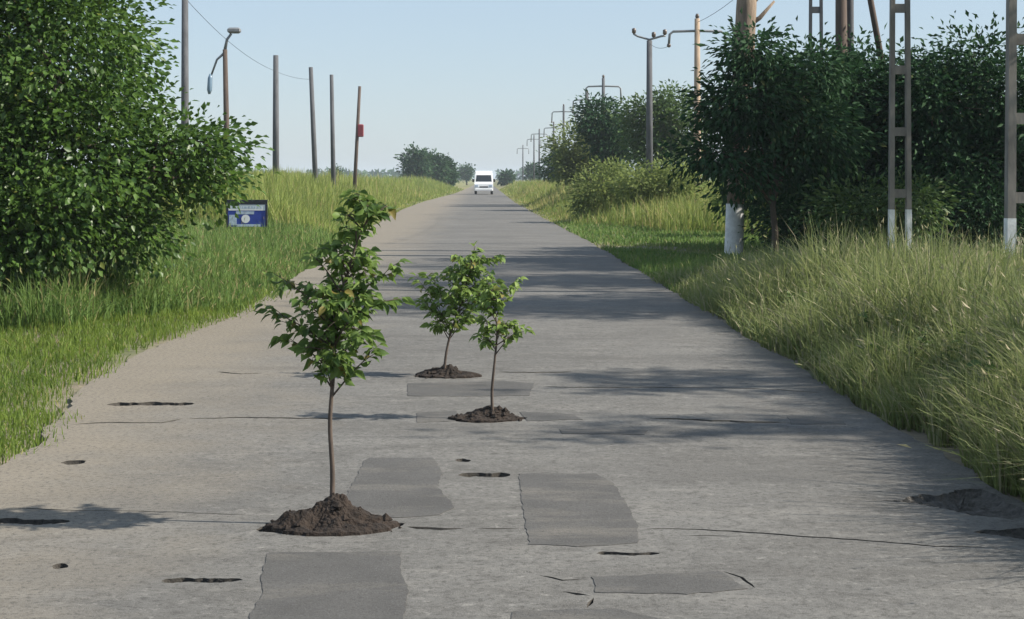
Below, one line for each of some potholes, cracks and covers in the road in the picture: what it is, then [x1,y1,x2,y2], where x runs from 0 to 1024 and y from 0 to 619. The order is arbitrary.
crack [540,575,594,607]
pothole [883,489,1024,520]
crack [665,528,985,548]
